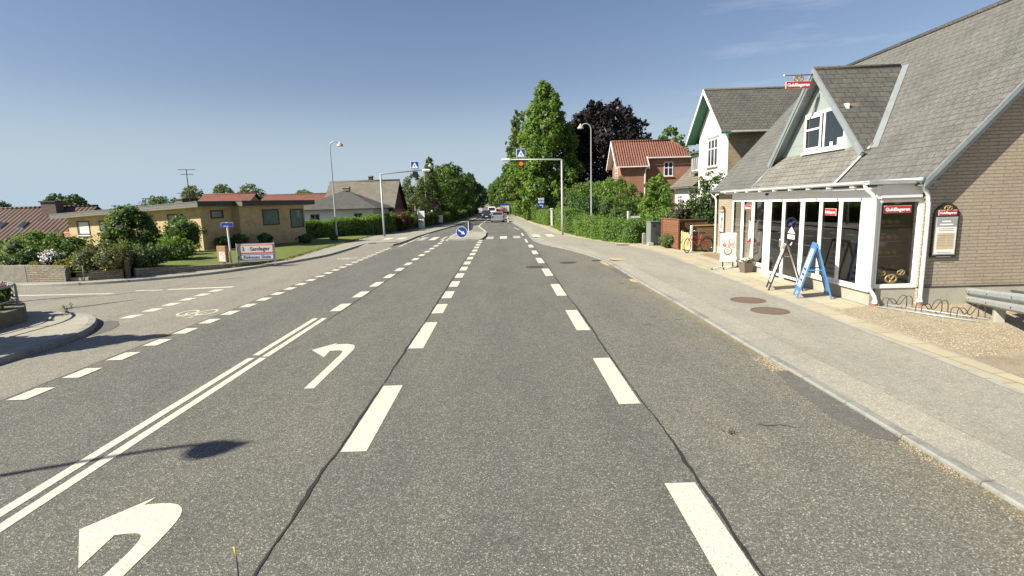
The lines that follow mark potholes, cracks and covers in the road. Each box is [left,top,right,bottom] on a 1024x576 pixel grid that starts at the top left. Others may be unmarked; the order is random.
manhole cover [750,307,790,315]
